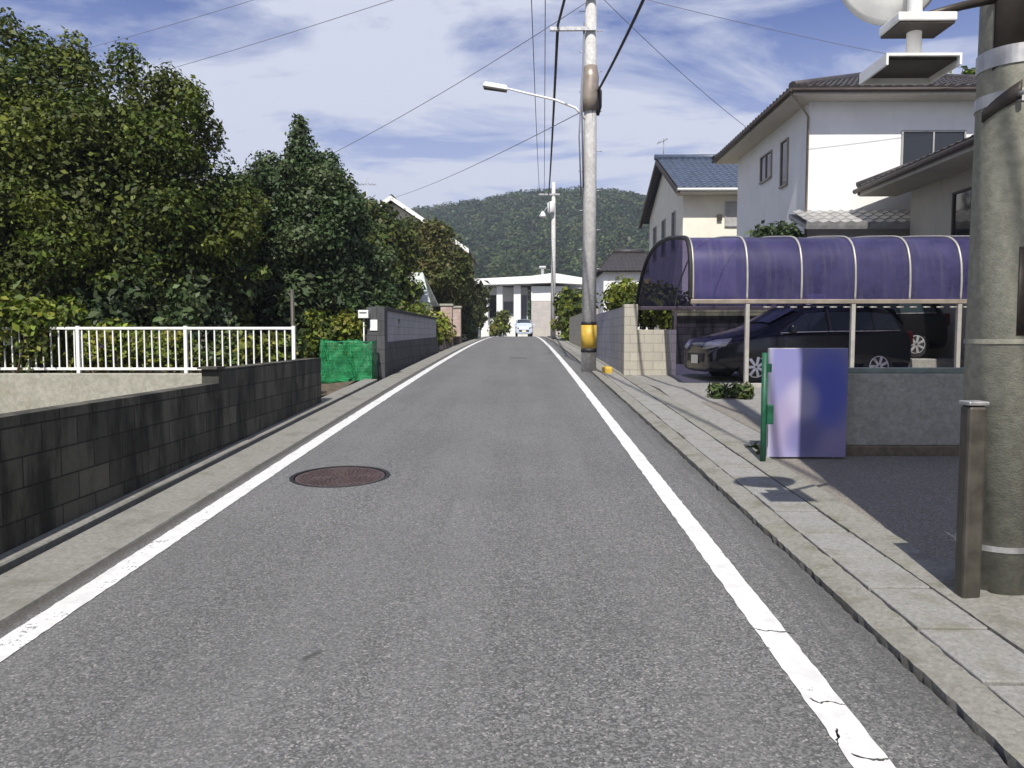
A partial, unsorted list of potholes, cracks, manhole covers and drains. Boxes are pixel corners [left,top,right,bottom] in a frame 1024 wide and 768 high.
manhole cover [289,466,390,488]
